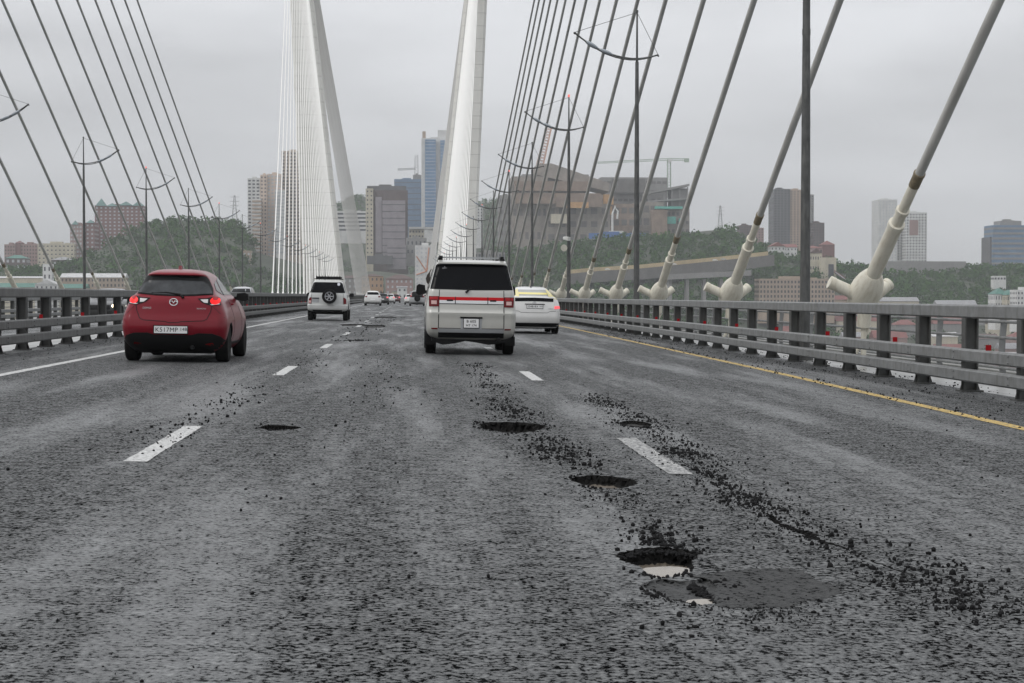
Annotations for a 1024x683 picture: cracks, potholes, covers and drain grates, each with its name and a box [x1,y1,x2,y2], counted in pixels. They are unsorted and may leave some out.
pothole [642,578,718,605]
pothole [570,475,639,489]
pothole [479,422,547,433]
pothole [615,547,698,579]
